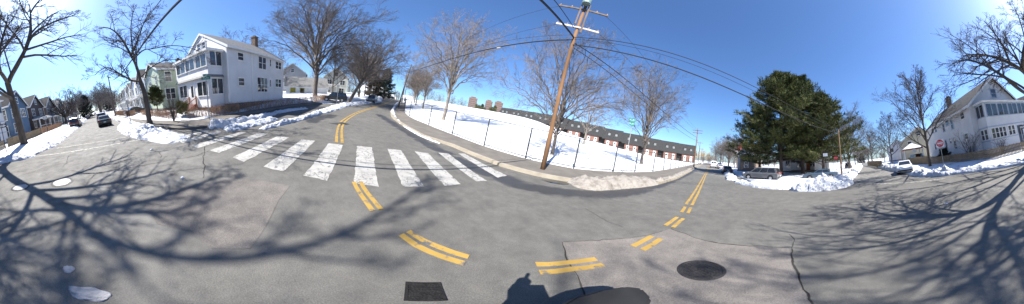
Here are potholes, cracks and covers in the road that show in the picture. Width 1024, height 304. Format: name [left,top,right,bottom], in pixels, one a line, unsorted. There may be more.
manhole cover [677,260,726,281]
